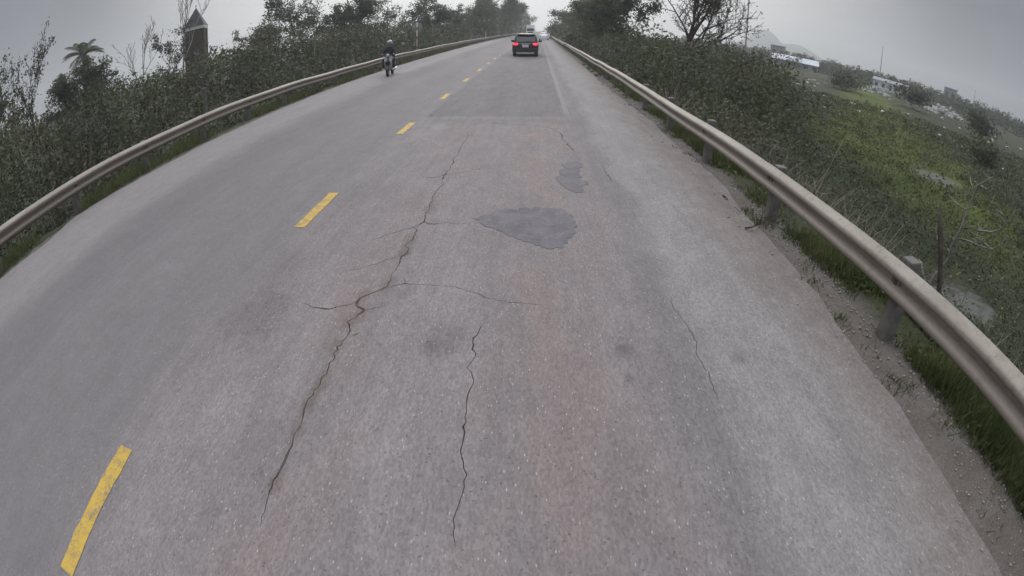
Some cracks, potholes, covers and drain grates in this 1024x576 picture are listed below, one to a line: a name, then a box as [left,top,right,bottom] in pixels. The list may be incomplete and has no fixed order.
crack [259,135,538,528]
crack [670,296,719,401]
